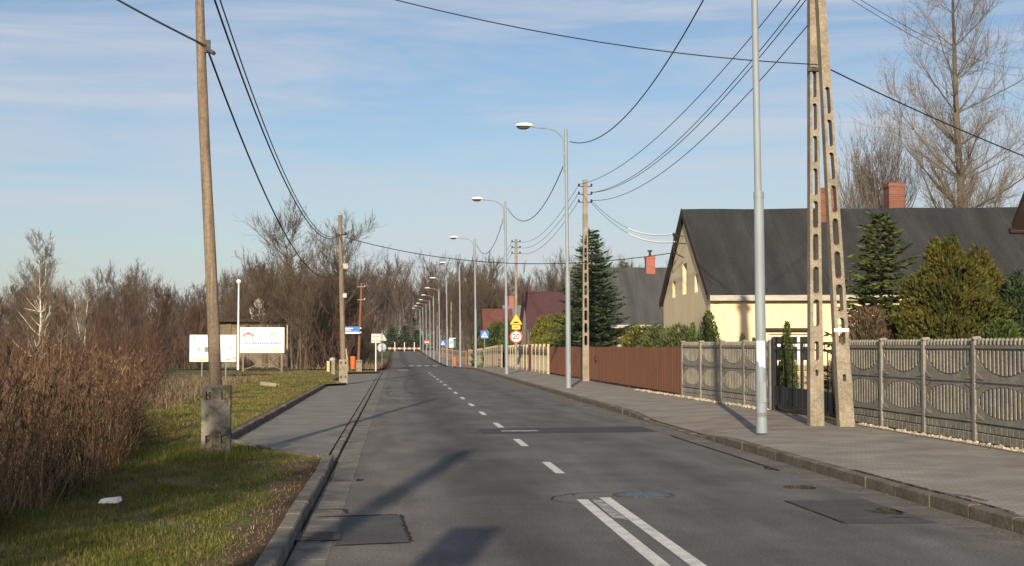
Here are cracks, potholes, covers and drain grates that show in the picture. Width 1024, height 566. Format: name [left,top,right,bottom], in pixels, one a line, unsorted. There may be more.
manhole cover [612,491,675,499]
